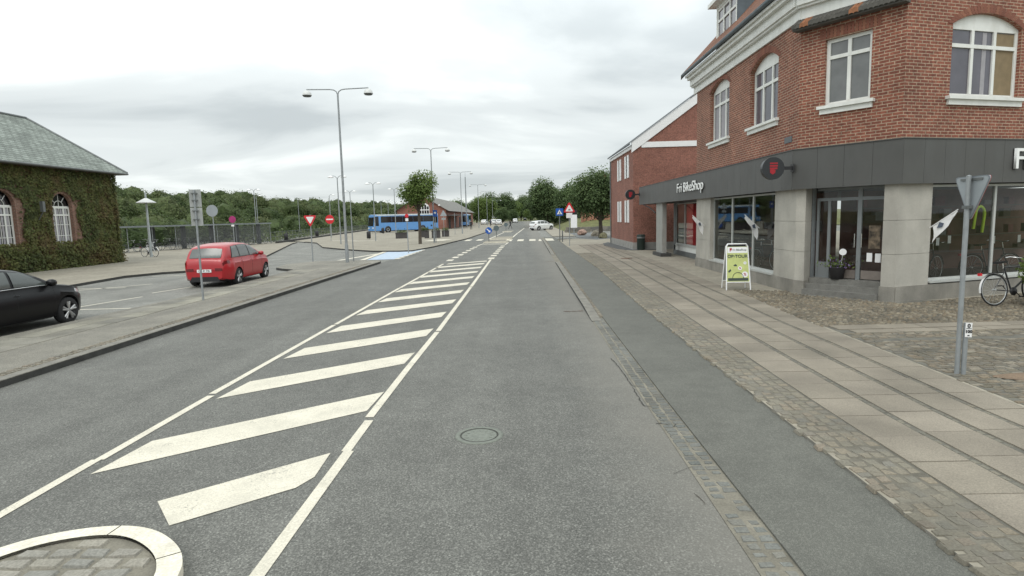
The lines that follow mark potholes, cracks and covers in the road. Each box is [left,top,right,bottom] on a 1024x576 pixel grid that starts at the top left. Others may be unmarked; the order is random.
manhole cover [455,427,503,445]
